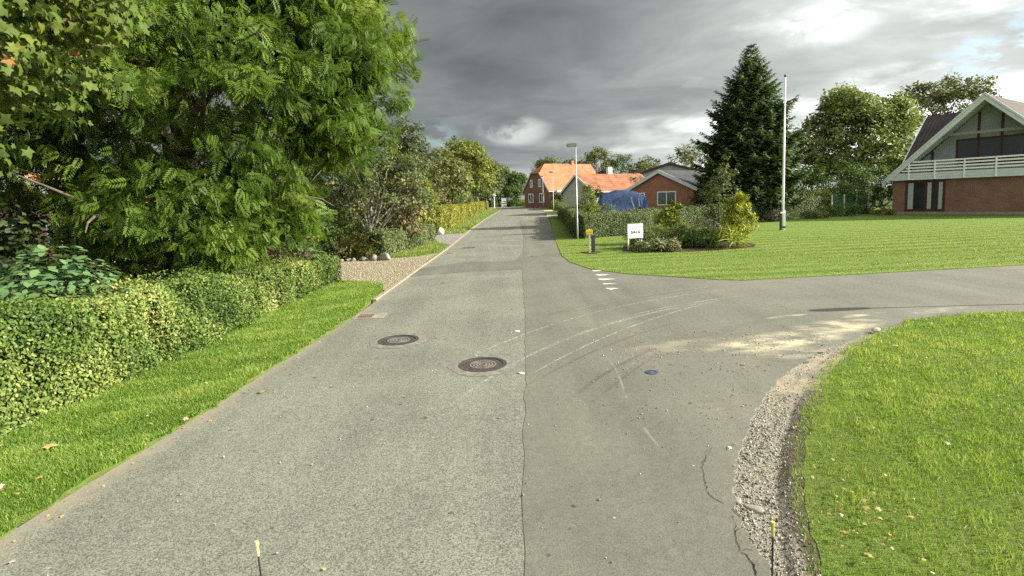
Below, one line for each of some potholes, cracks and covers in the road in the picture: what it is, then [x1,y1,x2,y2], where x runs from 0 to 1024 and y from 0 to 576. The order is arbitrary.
manhole cover [370,333,429,349]
manhole cover [447,355,517,376]
crack [702,449,758,576]
